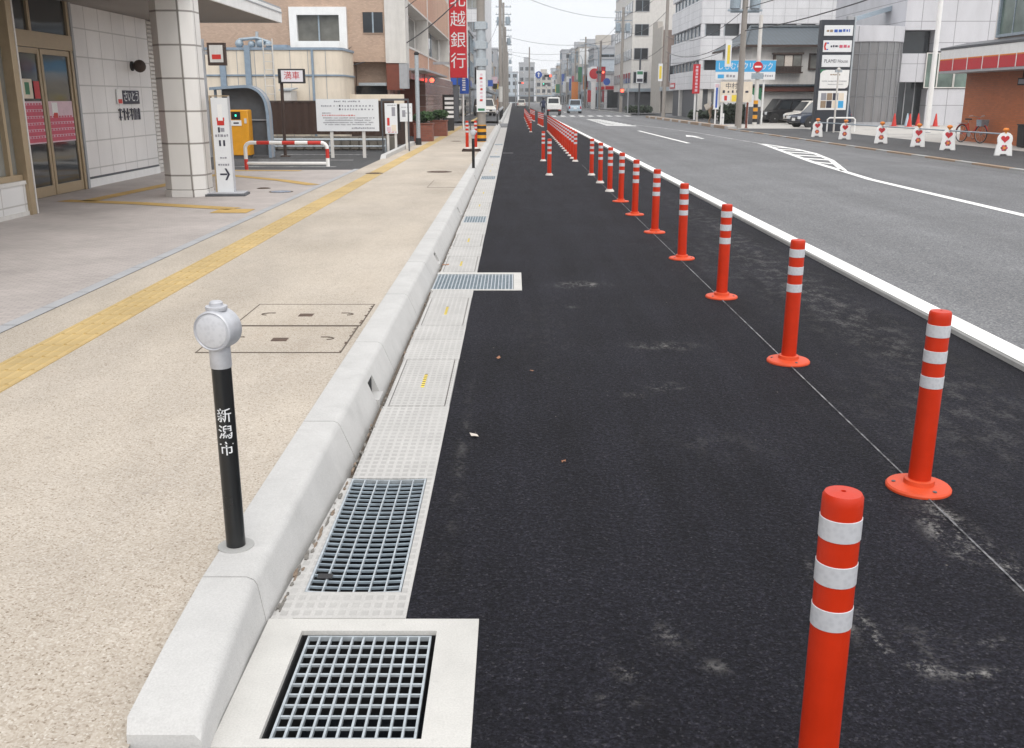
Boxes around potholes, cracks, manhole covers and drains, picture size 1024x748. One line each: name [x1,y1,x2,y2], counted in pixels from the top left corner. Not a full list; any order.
drain grate [432,274,513,289]
manhole cover [240,304,375,326]
drain grate [269,636,432,739]
manhole cover [195,326,359,353]
drain grate [305,479,427,592]
